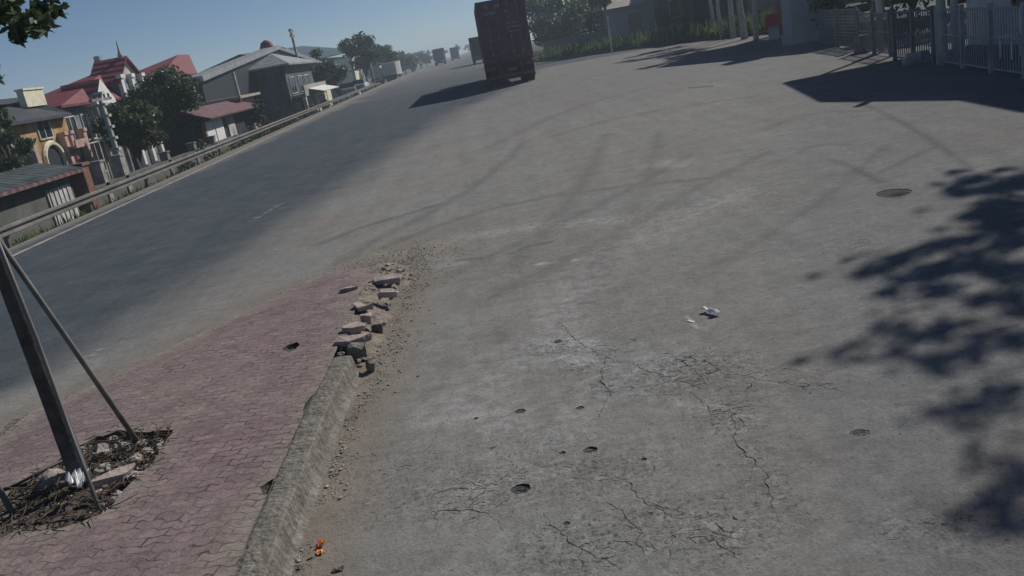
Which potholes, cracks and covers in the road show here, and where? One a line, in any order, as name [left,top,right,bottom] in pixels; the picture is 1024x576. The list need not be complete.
crack [430,475,512,530]
crack [543,460,749,570]
manhole cover [875,189,912,197]
crack [558,321,840,534]
pothole [510,483,531,494]
